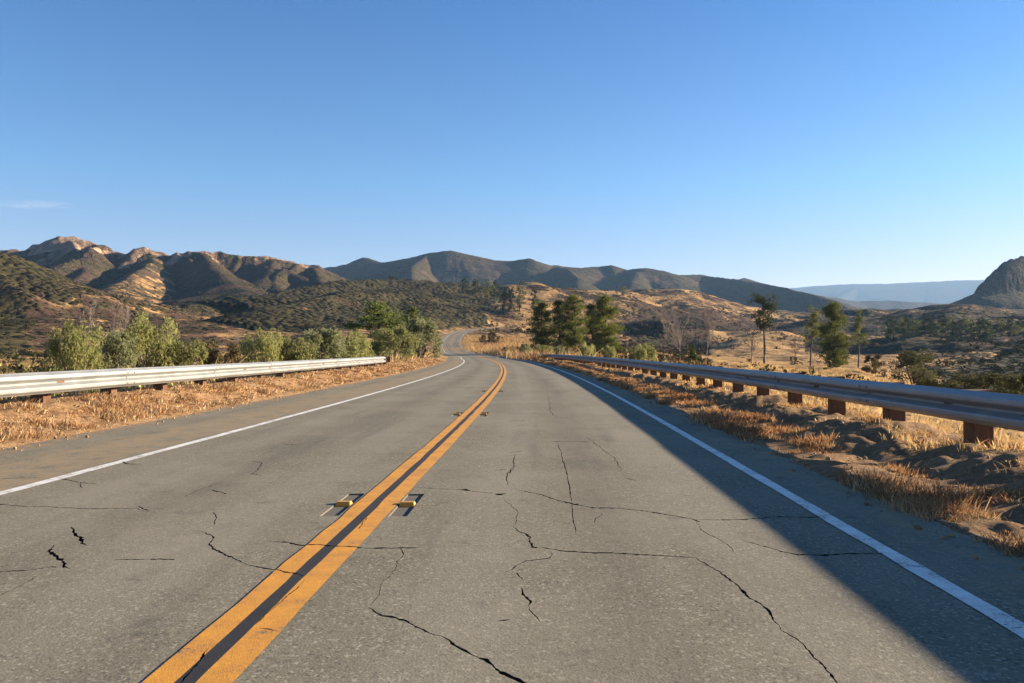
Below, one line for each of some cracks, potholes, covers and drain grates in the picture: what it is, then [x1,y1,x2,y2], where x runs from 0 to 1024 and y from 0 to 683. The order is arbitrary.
crack [274,541,526,683]
crack [202,512,296,574]
crack [743,540,881,556]
crack [0,527,86,595]
crack [421,456,838,683]
